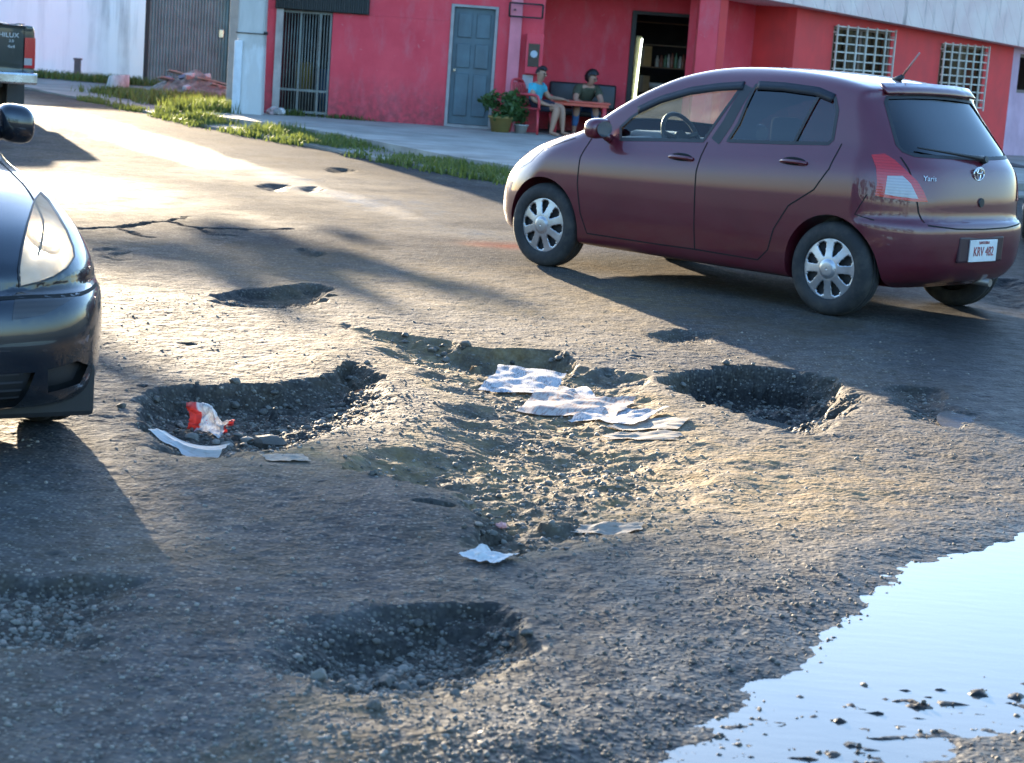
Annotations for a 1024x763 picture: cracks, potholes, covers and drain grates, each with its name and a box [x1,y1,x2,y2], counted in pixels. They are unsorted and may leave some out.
pothole [656,364,872,436]
pothole [292,247,331,259]
pothole [335,323,741,563]
pothole [129,360,408,459]
crack [77,216,297,238]
pothole [206,283,339,309]
pothole [0,572,161,665]
pothole [880,385,992,429]
pothole [241,601,548,701]
pothole [253,183,294,192]
